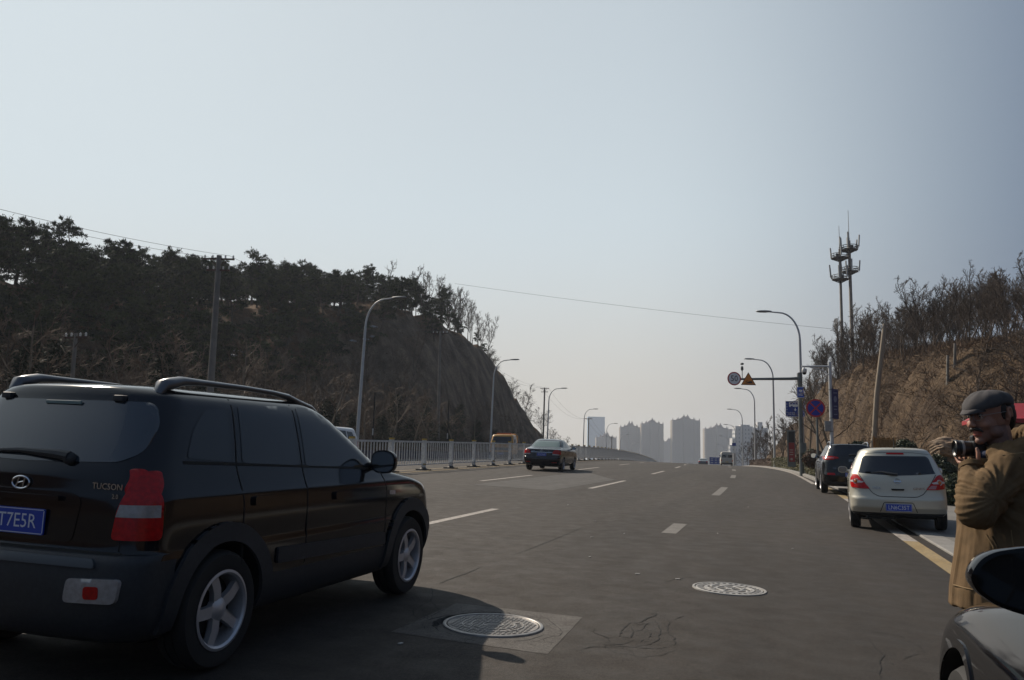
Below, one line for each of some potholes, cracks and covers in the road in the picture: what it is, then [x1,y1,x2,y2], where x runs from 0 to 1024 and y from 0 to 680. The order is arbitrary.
crack [834,630,922,678]
manhole cover [692,582,767,596]
crack [572,613,693,660]
manhole cover [443,613,543,638]
